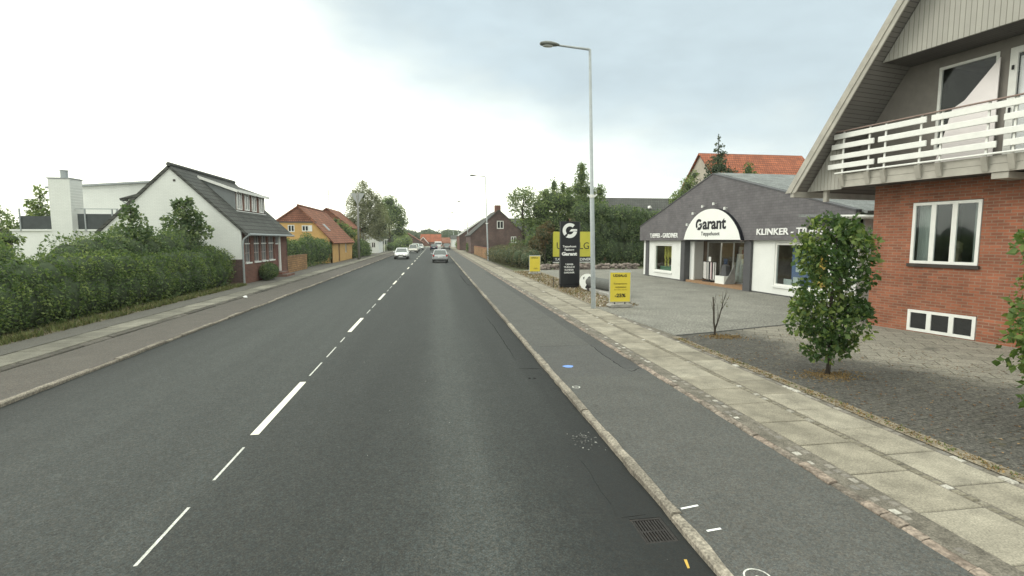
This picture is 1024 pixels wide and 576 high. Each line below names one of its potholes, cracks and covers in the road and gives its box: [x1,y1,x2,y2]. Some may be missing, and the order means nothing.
drain grate [629,517,679,544]
